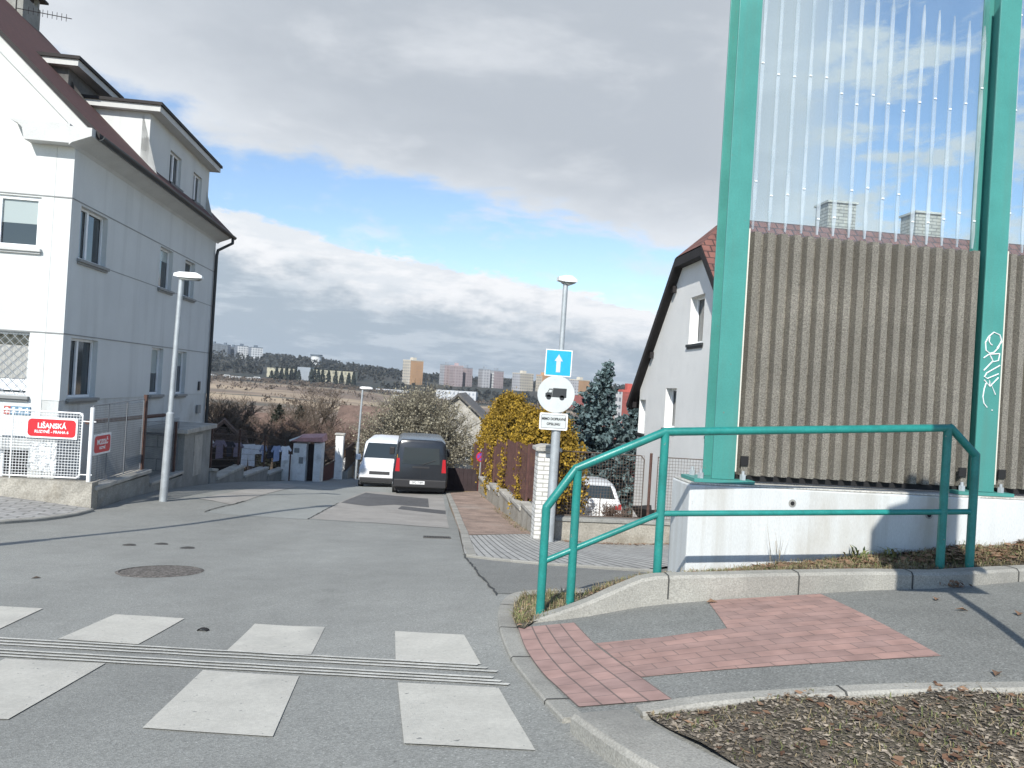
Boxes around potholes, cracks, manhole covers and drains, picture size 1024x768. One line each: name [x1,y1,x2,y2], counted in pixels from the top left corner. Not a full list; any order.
manhole cover [115,565,205,577]
